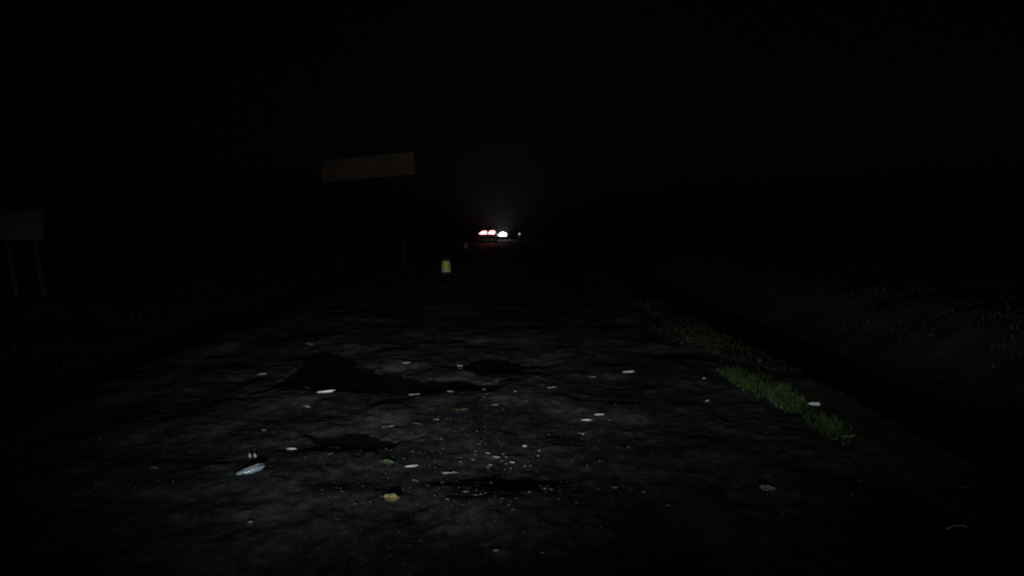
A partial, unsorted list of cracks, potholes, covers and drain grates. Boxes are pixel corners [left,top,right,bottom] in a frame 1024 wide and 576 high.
pothole [267,343,507,396]
pothole [300,426,403,451]
pothole [446,353,542,375]
pothole [446,467,563,488]
